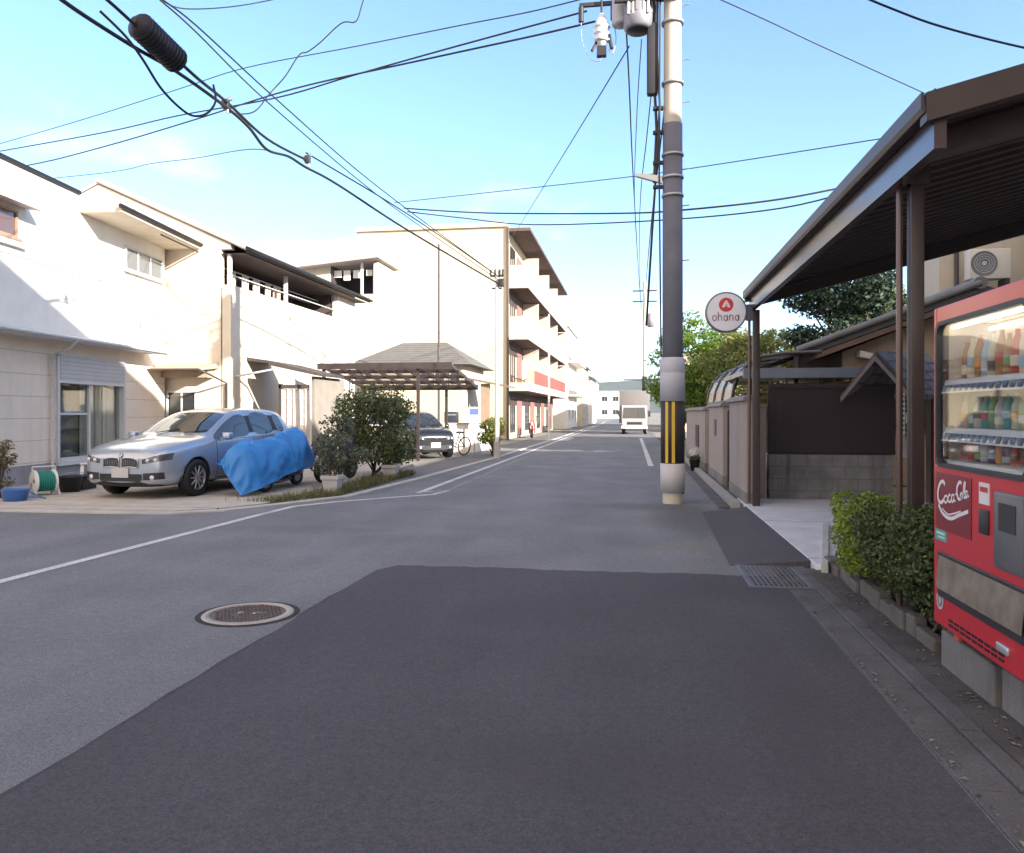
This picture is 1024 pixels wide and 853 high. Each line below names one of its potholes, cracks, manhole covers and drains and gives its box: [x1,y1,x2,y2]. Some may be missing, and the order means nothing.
manhole cover [195,602,300,627]
drain grate [735,565,814,590]
